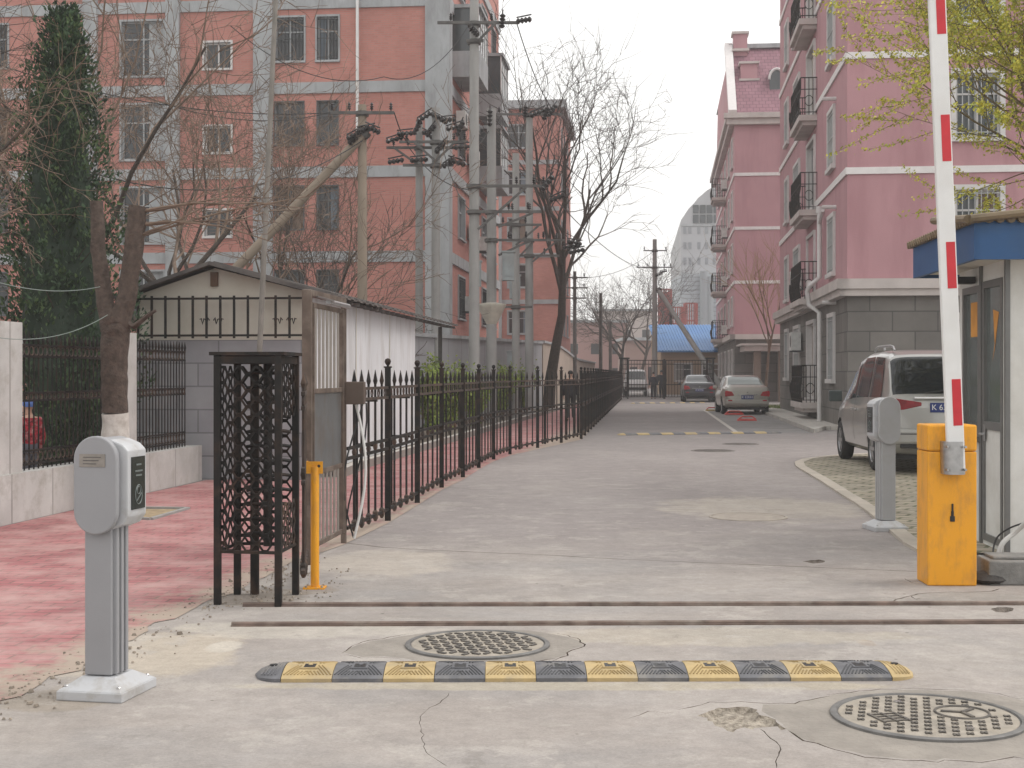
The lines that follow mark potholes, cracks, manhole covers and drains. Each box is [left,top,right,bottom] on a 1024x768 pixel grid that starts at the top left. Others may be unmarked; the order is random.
manhole cover [830,693,1024,743]
pothole [698,707,786,732]
manhole cover [405,629,550,660]
